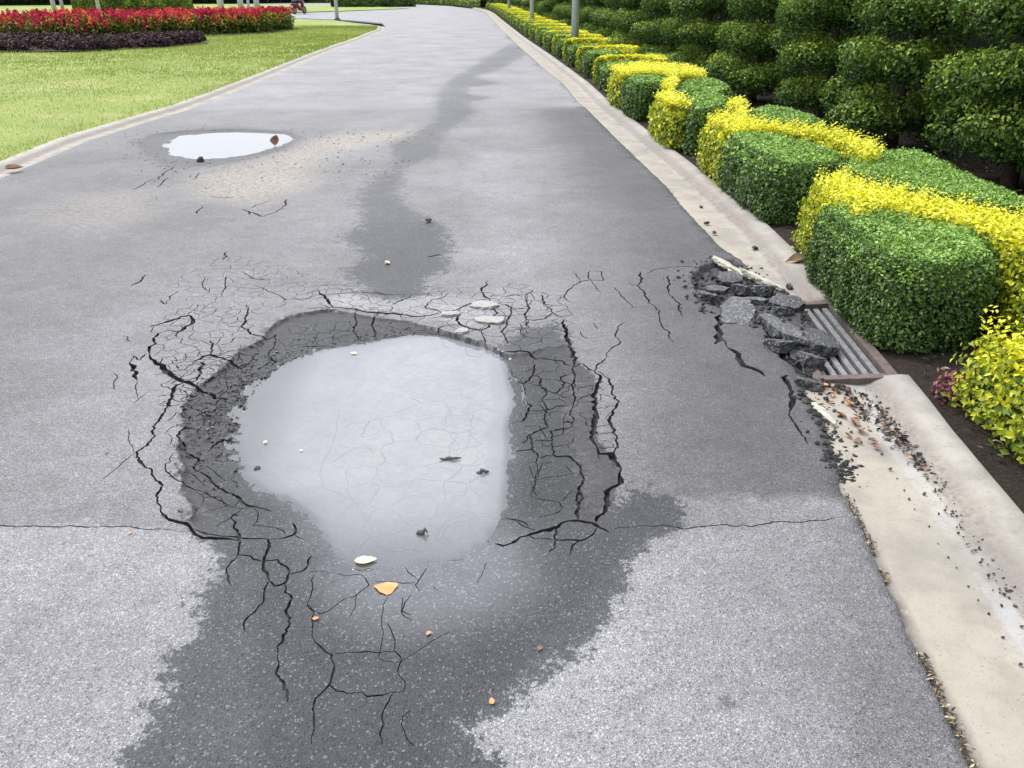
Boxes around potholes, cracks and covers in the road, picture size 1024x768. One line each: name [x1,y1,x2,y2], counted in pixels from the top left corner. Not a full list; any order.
crack [103,252,683,747]
pothole [134,129,300,166]
crack [196,196,287,217]
pothole [175,309,622,604]
drain grate [803,301,898,385]
crack [713,315,808,444]
